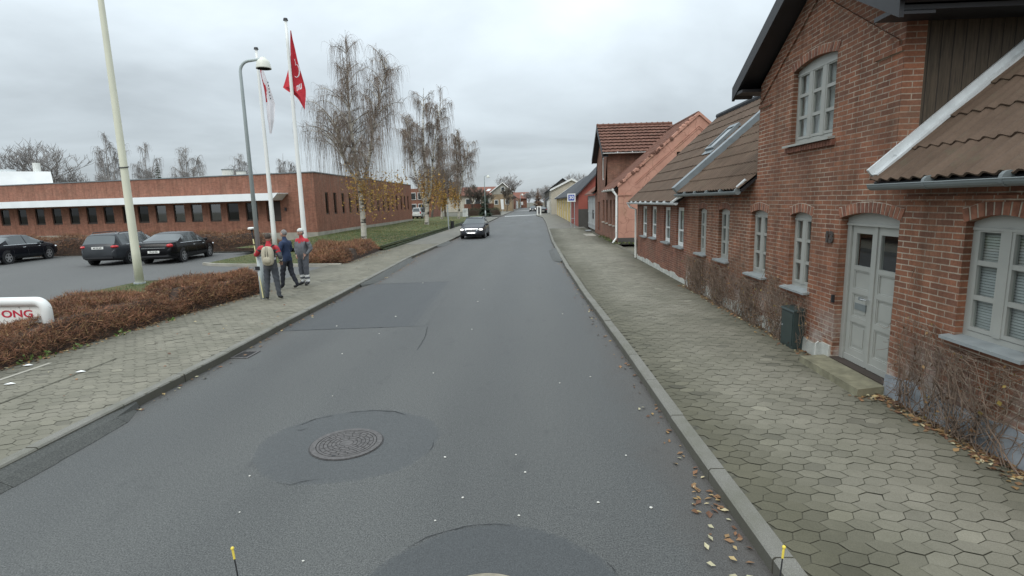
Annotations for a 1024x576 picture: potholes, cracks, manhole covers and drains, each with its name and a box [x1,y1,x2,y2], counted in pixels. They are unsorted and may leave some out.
manhole cover [308,428,384,461]
drain grate [230,351,260,359]
